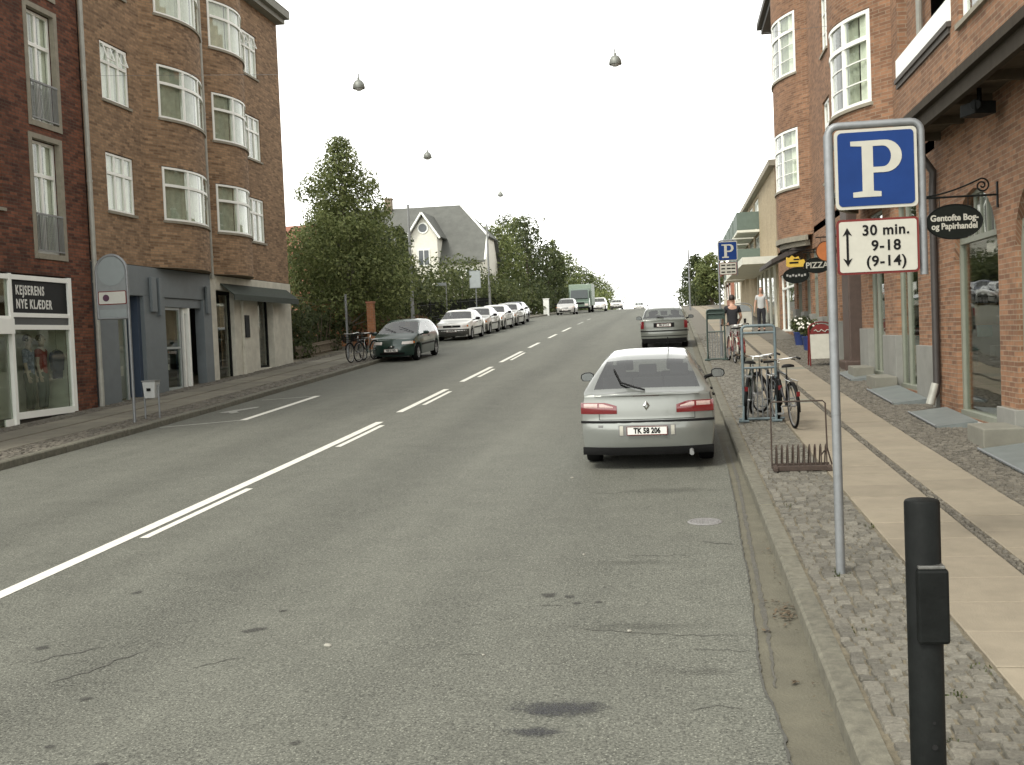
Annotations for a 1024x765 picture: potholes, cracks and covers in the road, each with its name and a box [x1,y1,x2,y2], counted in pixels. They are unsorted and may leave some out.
crack [33,647,146,684]
